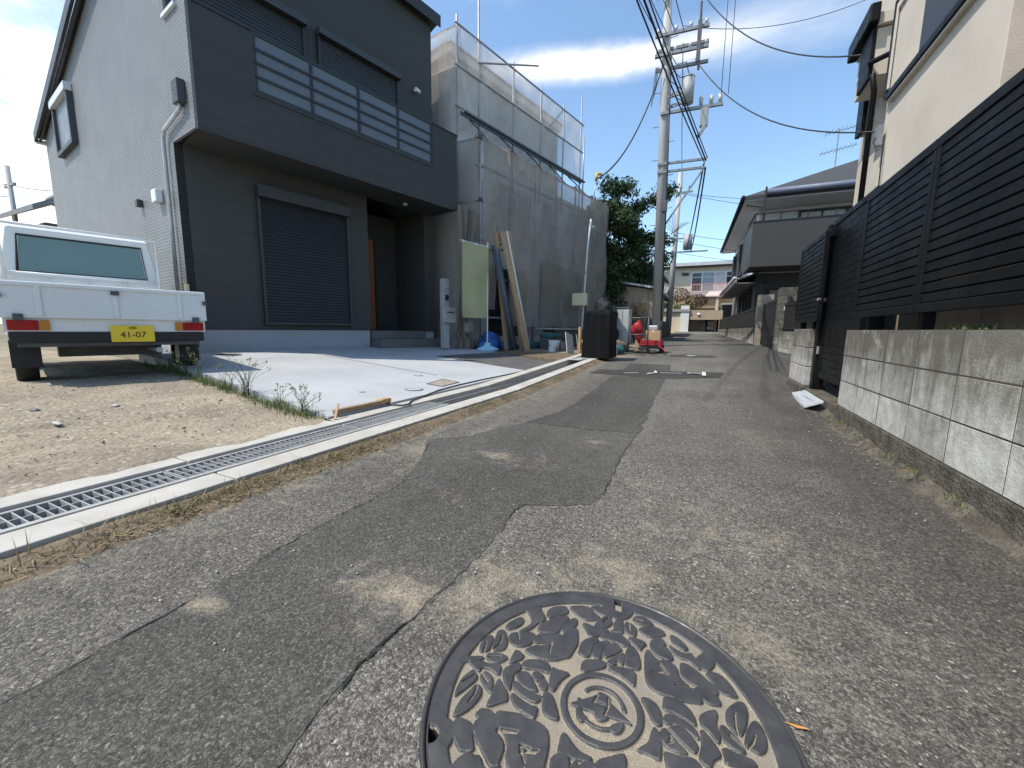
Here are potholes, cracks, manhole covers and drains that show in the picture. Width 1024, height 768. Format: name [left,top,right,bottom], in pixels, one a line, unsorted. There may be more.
crack [280,579,457,768]
manhole cover [420,591,810,768]
drain grate [342,402,450,430]
drain grate [0,471,188,535]
drain grate [163,425,363,481]
crack [0,474,409,705]
utility cover [427,379,459,387]
